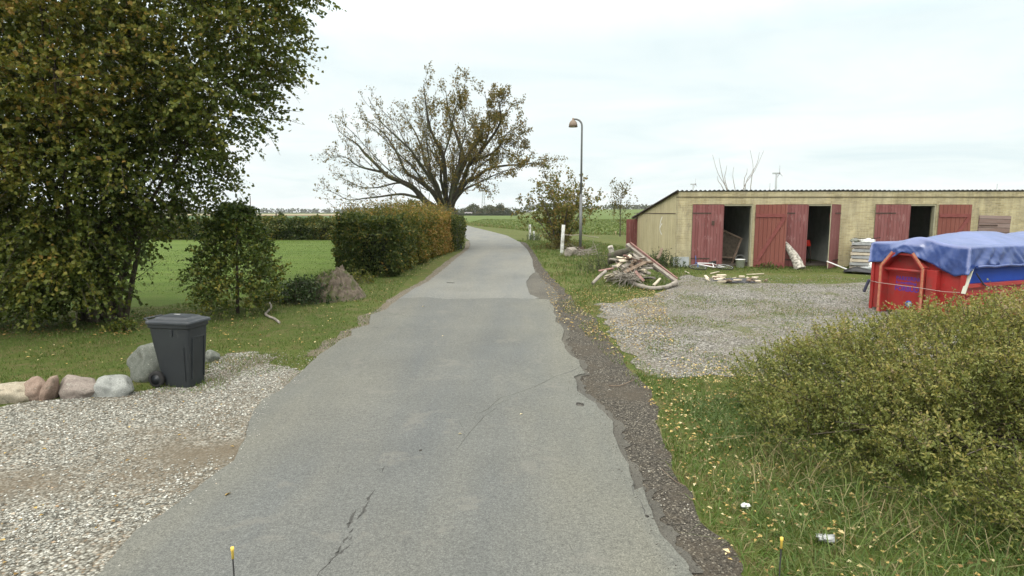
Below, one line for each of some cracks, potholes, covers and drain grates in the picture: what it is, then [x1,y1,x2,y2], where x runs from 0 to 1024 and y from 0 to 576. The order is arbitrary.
crack [317,487,375,576]
crack [457,366,581,449]
